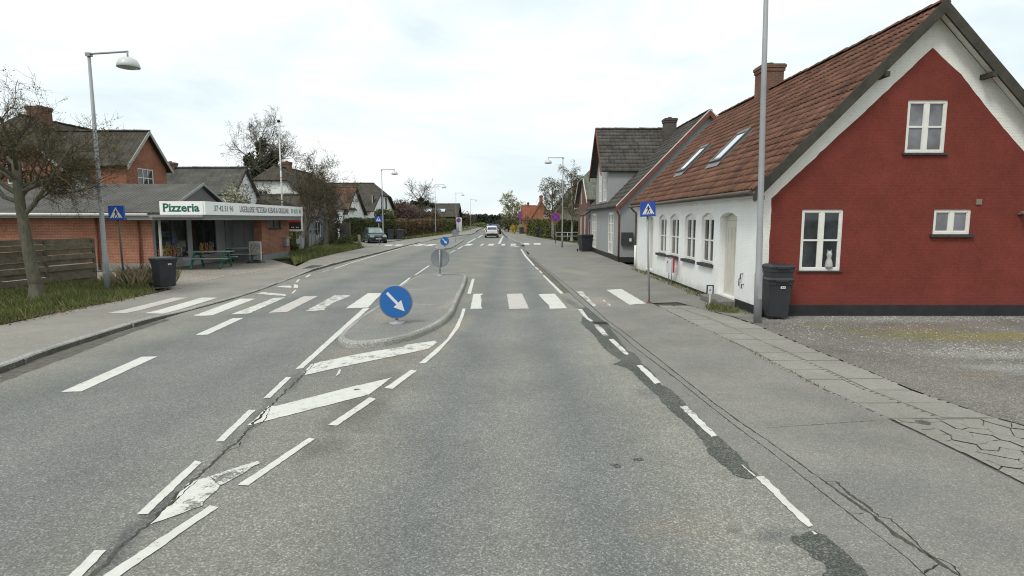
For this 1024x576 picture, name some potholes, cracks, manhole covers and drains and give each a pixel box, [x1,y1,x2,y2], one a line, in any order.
crack [88,364,314,576]
crack [529,255,1024,576]
